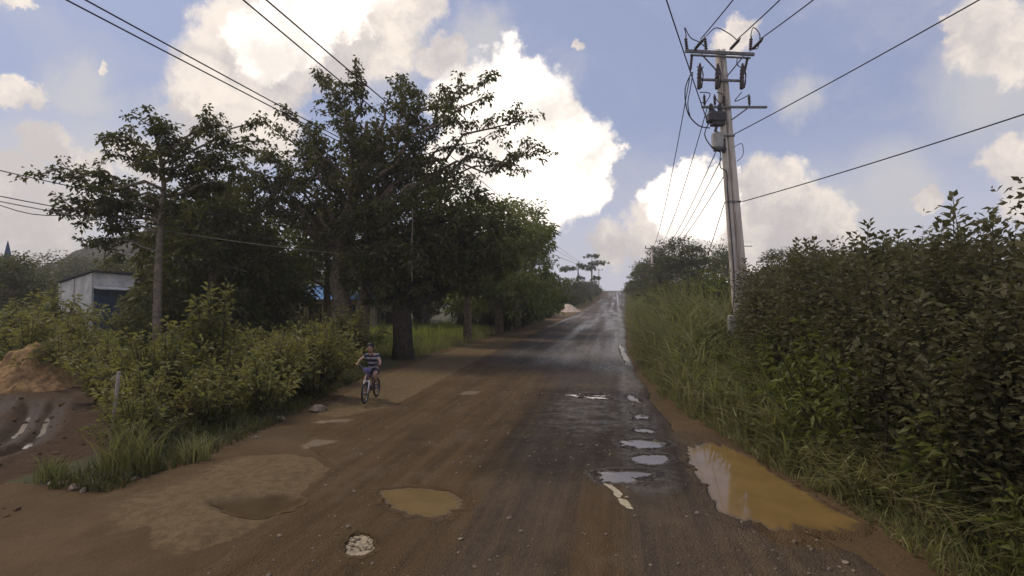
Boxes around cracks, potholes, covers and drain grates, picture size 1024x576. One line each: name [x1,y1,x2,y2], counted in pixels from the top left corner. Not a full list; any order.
pothole [625,452,675,466]
pothole [609,437,680,452]
pothole [586,467,664,486]
pothole [622,392,645,404]
pothole [630,412,653,420]
pothole [676,440,877,543]
pothole [367,483,478,522]
pothole [341,528,382,559]
